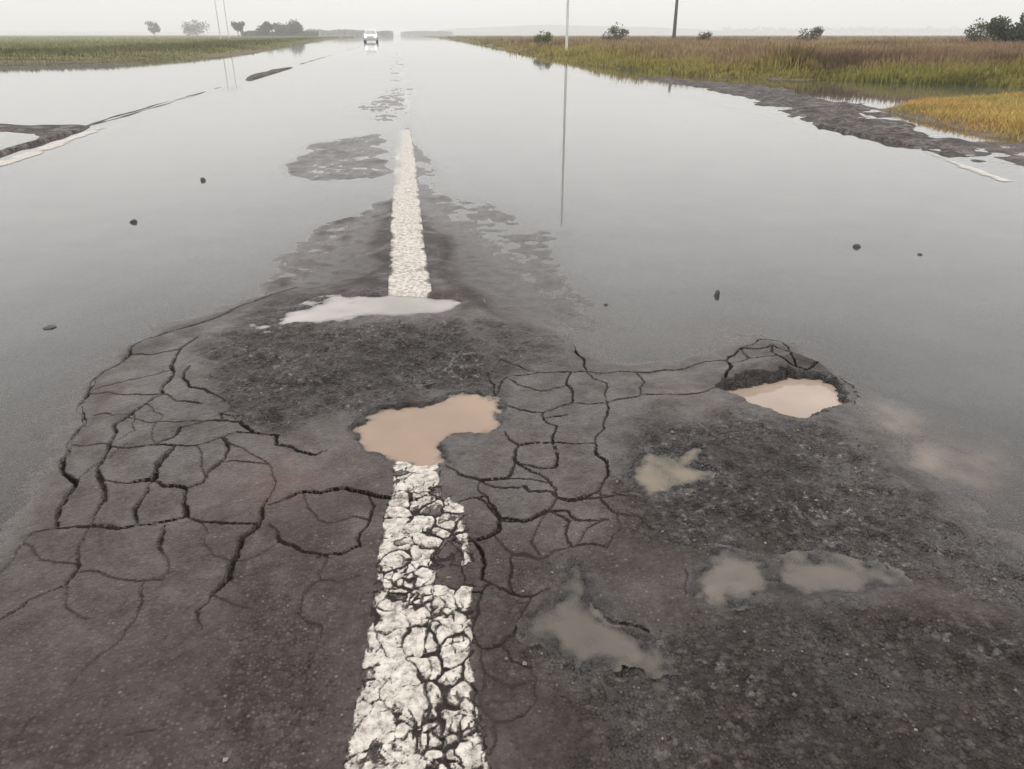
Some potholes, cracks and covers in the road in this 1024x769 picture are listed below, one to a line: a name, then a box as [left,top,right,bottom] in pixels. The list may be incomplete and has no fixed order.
pothole [618,438,712,497]
crack [724,339,818,379]
pothole [685,546,905,610]
pothole [522,555,670,677]
pothole [345,387,515,467]
crack [1,287,725,769]
pothole [715,363,853,417]
